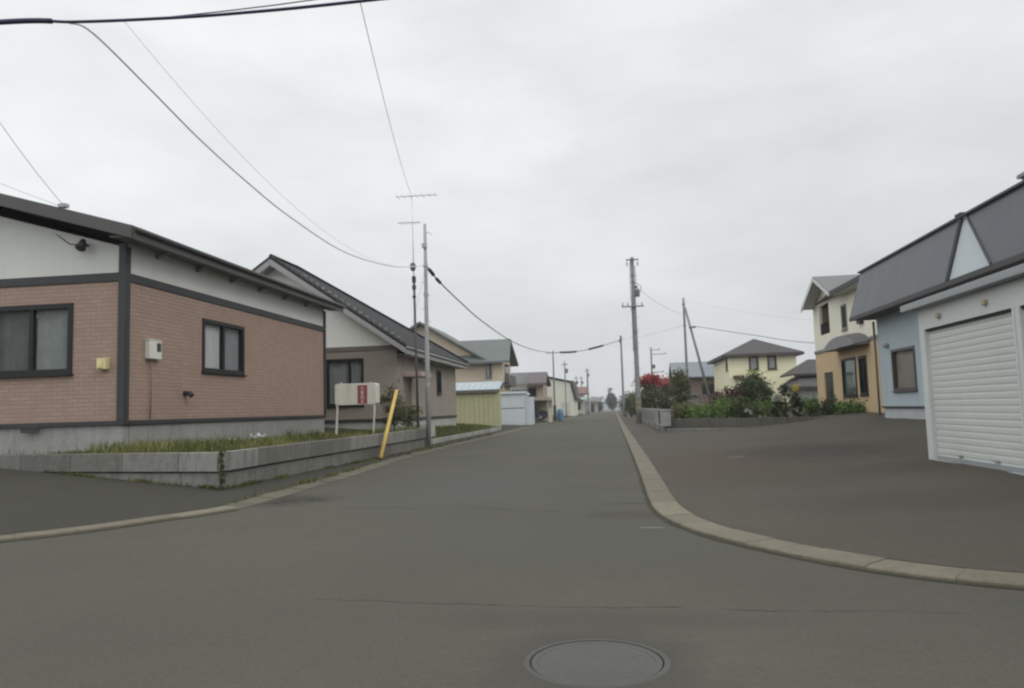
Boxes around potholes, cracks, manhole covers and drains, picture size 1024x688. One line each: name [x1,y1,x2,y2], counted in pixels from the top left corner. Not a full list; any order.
manhole cover [524,639,670,688]
